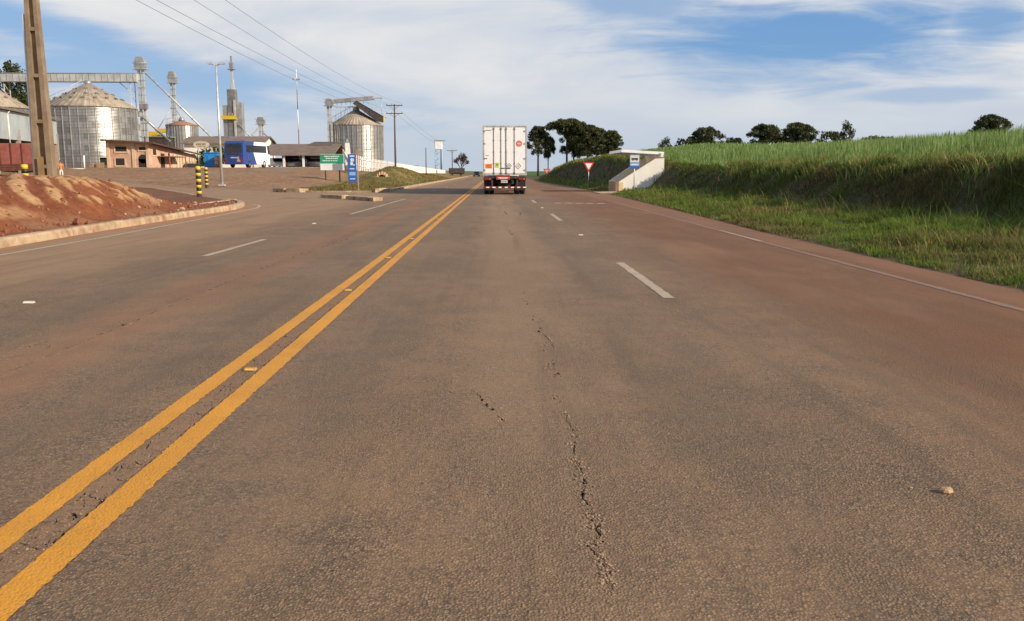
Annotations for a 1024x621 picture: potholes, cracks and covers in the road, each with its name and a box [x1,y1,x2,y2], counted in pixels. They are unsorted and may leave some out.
crack [523,292,619,597]
crack [445,390,506,421]
